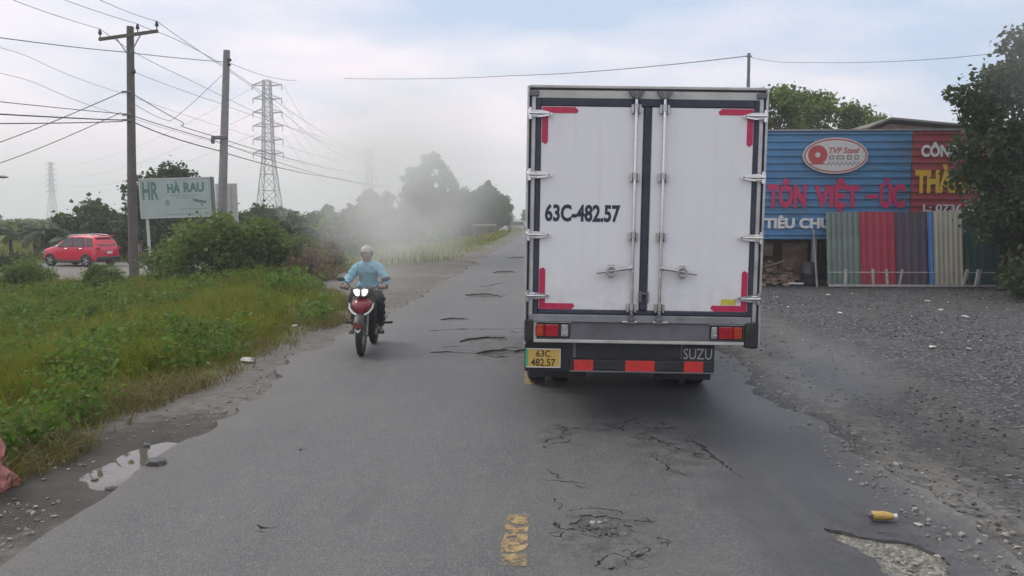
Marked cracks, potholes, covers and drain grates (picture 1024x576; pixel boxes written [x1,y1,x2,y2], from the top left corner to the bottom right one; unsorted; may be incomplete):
pothole [568,514,636,543]
crack [542,416,742,478]
pothole [824,528,951,576]
crack [541,470,672,570]
